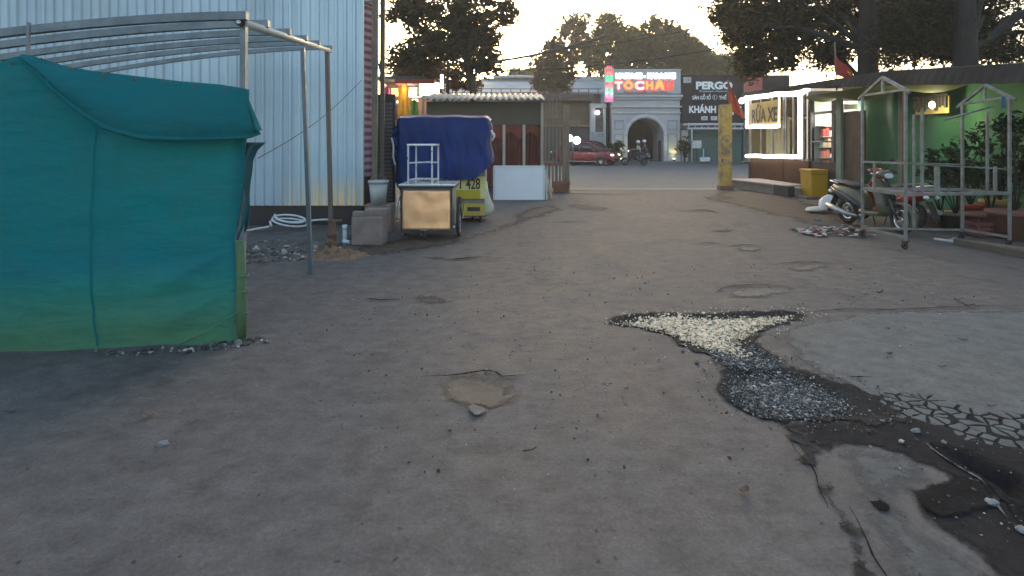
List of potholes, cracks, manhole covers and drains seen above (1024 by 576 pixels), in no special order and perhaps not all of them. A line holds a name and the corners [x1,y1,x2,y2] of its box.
pothole [870,500,890,511]
crack [790,439,828,507]
pothole [608,310,808,362]
crack [848,376,1024,449]
pothole [440,374,518,408]
pothole [715,366,908,426]
crack [849,507,887,576]
pothole [931,441,1024,526]
